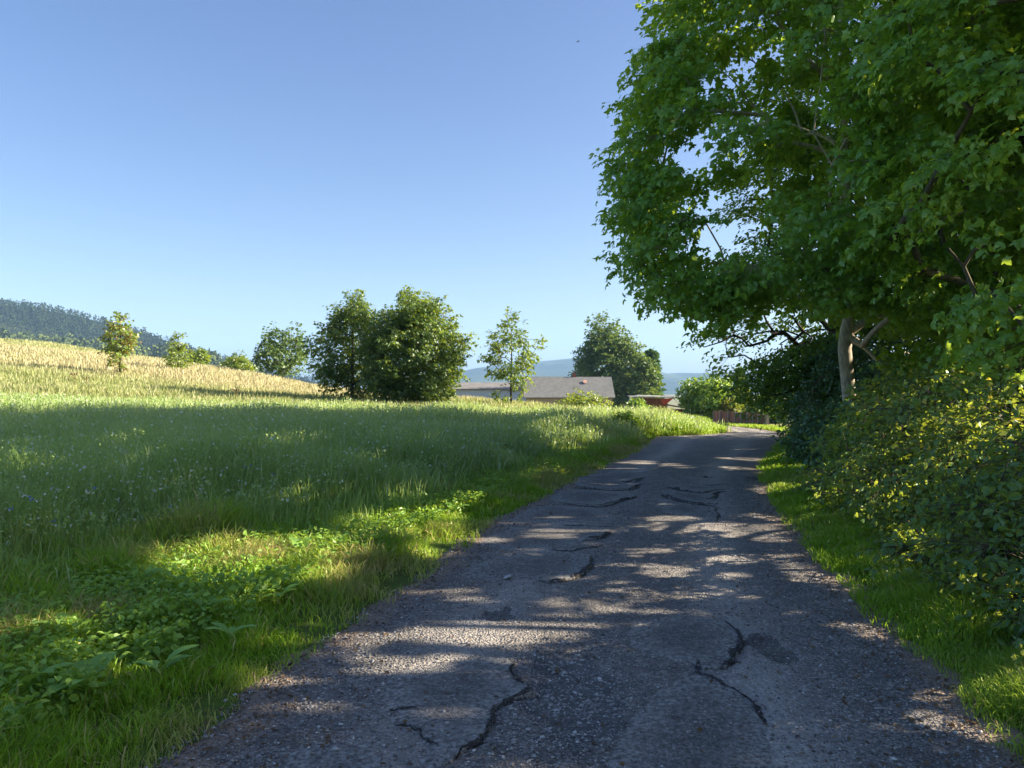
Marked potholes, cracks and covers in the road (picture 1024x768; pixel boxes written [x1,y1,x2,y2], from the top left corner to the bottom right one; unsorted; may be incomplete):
crack [548,479,643,583]
crack [661,483,725,520]
crack [389,706,439,746]
